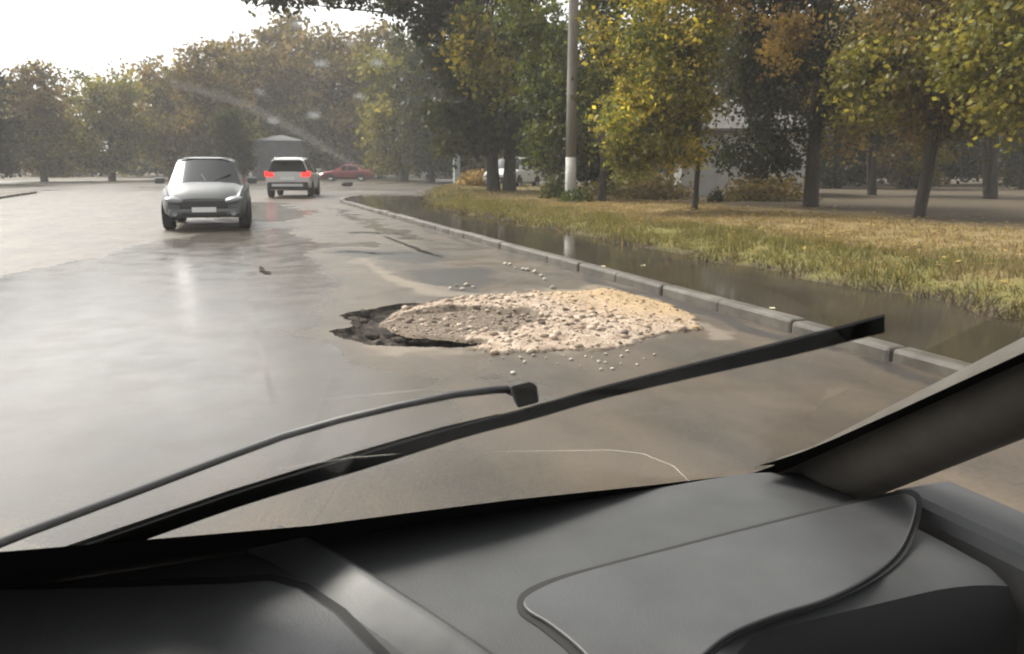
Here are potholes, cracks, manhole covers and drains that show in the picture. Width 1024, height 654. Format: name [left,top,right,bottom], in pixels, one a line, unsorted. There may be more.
pothole [329,303,482,348]
crack [331,232,441,256]
